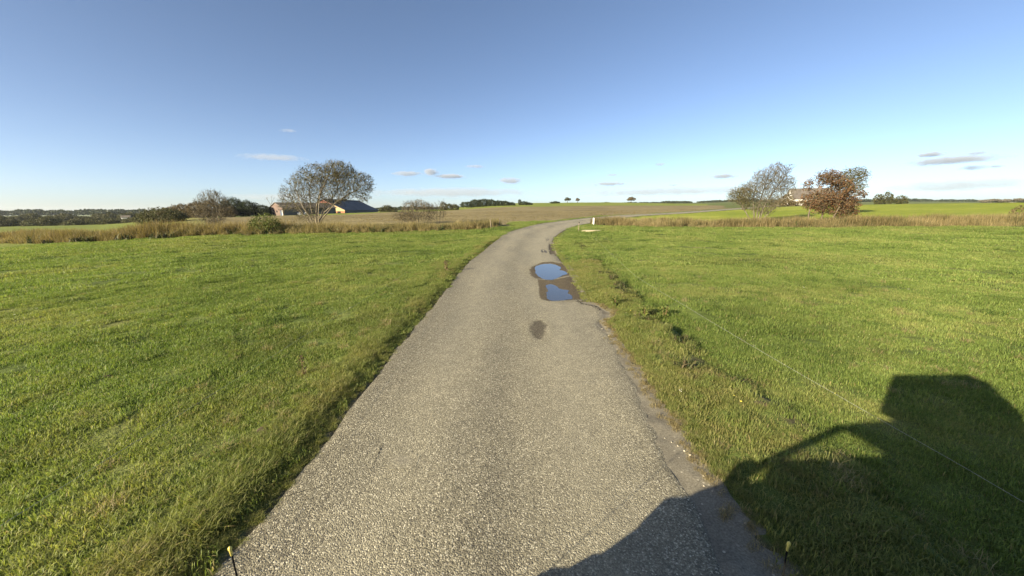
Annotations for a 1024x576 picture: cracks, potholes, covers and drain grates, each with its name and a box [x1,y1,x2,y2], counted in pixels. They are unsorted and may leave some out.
pothole [534,275,587,302]
pothole [524,261,579,280]
